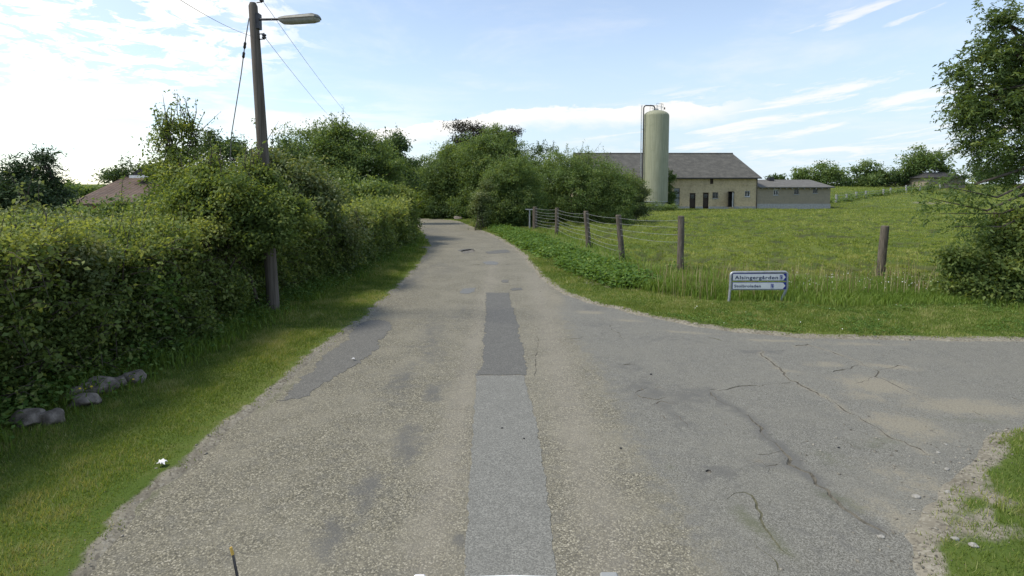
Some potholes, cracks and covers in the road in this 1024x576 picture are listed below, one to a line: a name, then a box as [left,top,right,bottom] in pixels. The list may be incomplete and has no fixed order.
crack [708,344,951,573]
